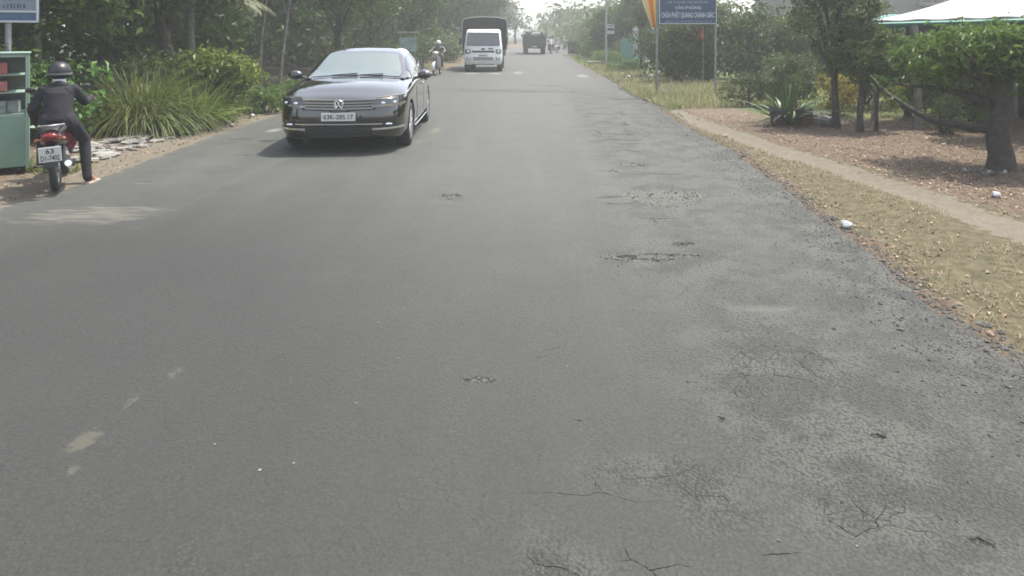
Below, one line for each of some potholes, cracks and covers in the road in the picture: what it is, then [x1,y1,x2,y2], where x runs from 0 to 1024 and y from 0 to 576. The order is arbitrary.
pothole [600,252,703,262]
pothole [967,535,995,549]
crack [518,457,729,512]
crack [583,113,649,152]
pothole [459,375,497,383]
pothole [620,185,707,209]
crack [816,474,927,544]
pothole [436,193,462,201]
